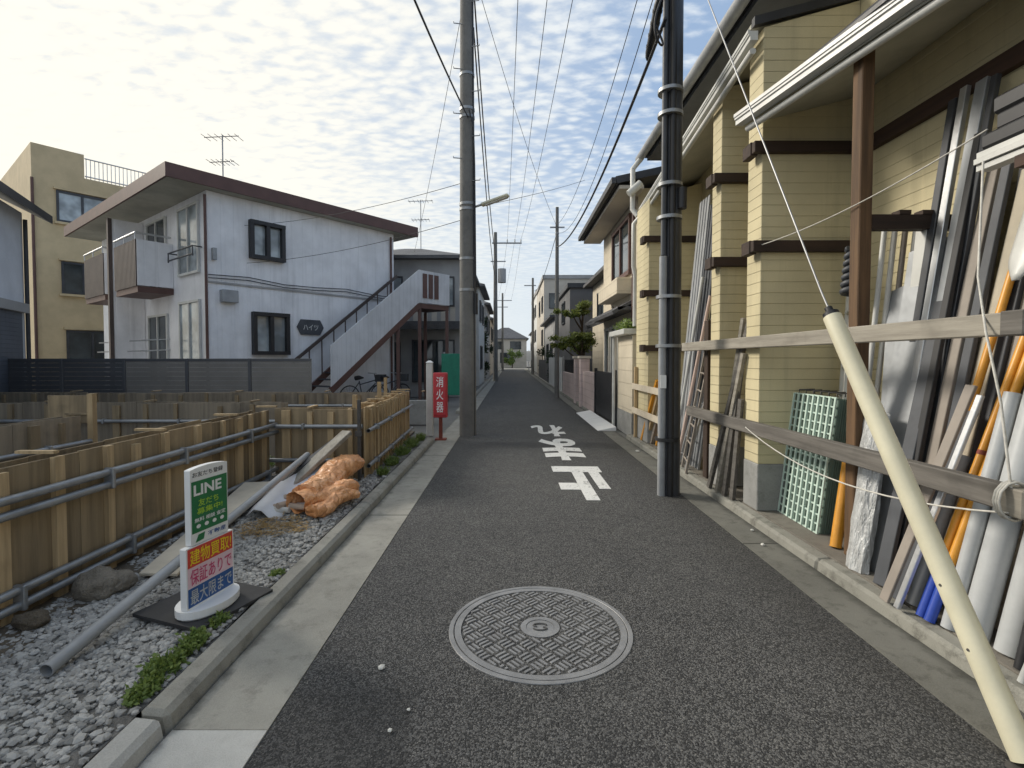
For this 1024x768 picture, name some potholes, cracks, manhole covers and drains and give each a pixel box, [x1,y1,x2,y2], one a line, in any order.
manhole cover [449,586,633,685]
